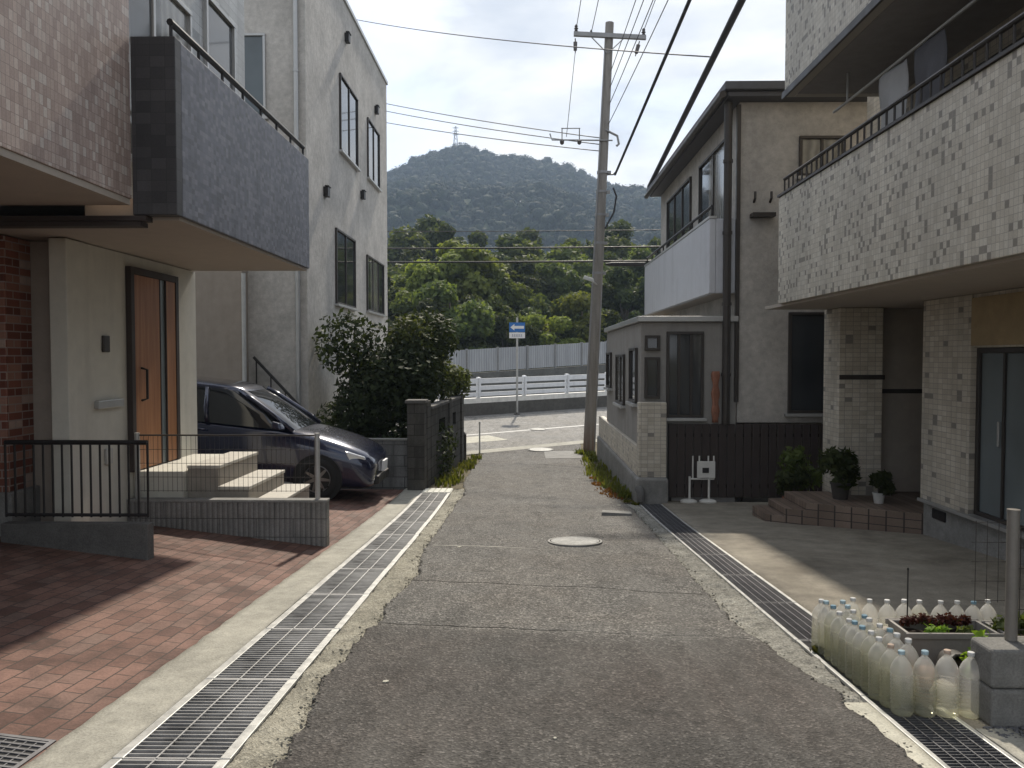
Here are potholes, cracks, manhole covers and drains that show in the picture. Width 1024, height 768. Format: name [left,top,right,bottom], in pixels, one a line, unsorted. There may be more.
manhole cover [548,536,603,547]
drain grate [360,535,419,551]
drain grate [695,554,758,577]
drain grate [639,504,674,514]
drain grate [267,594,369,631]
drain grate [112,679,297,763]
drain grate [719,575,796,603]
drain grate [649,514,688,526]
drain grate [751,602,812,642]
drain grate [306,568,390,595]
